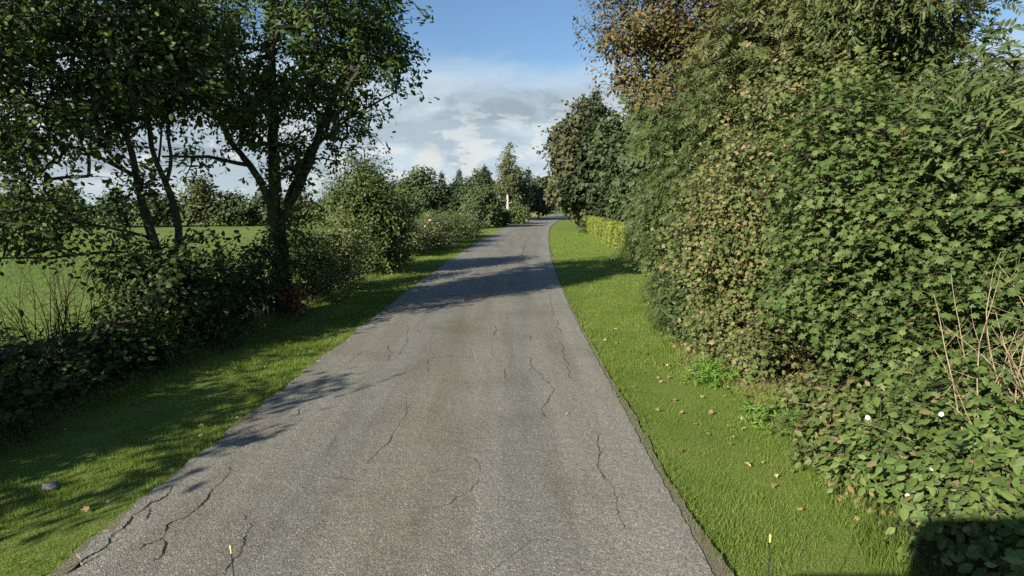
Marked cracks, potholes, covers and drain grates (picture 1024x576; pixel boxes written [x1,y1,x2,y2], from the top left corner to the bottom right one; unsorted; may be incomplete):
crack [62,465,230,574]
